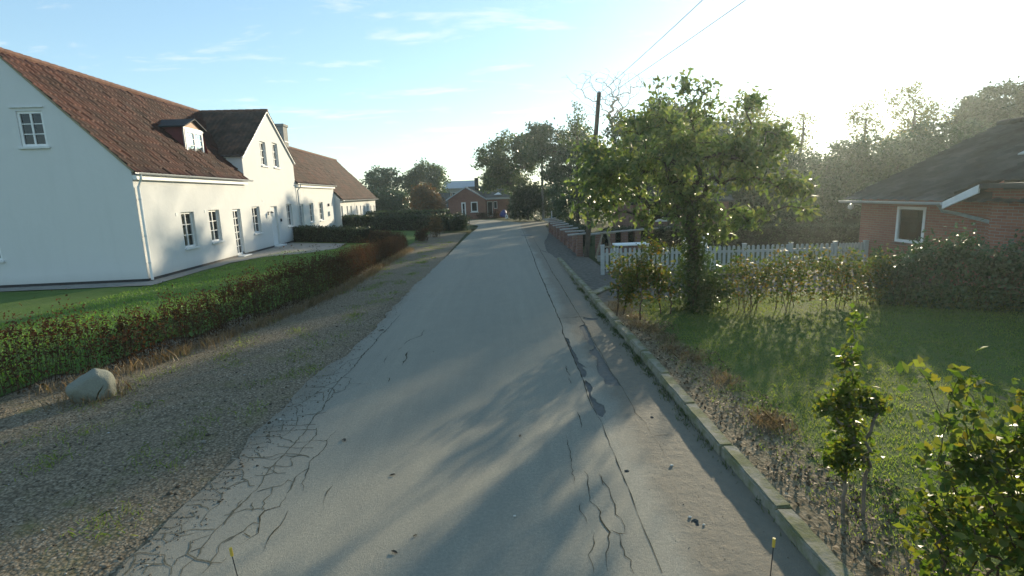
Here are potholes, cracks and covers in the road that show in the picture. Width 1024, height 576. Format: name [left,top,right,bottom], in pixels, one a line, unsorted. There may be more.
crack [113,316,423,575]
crack [567,412,634,573]
